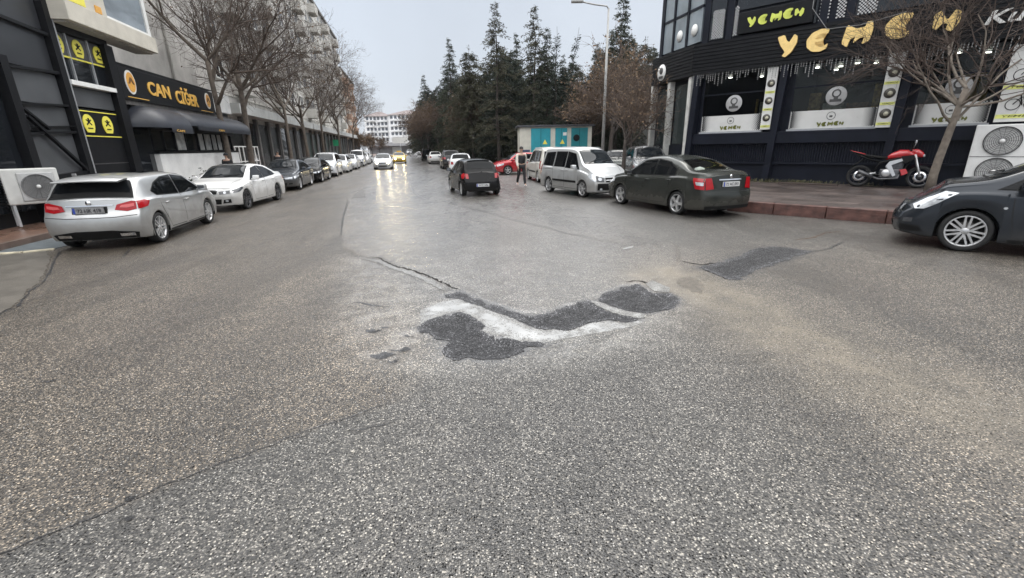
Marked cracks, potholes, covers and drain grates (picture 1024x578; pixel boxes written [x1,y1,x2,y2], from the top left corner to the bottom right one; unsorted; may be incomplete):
crack [372,257,458,289]
crack [0,250,61,315]
